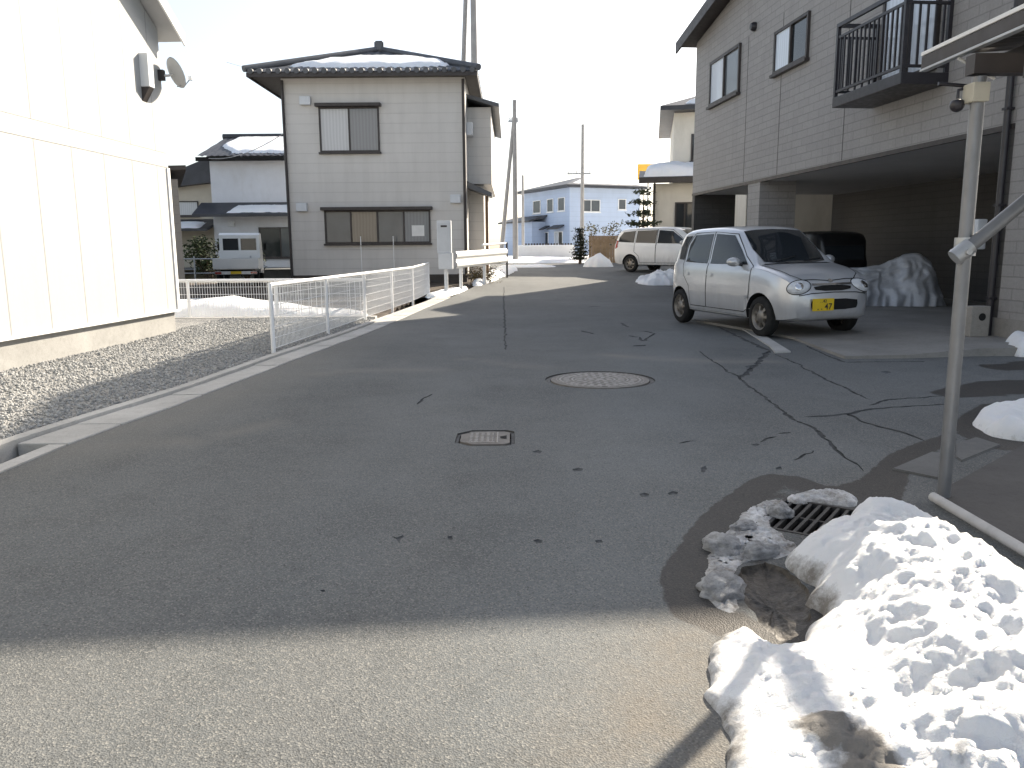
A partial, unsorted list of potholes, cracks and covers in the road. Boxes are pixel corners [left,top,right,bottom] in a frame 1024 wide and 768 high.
manhole cover [545,371,655,389]
drain grate [756,497,855,536]
crack [621,323,656,346]
manhole cover [455,430,515,446]
crack [700,326,944,471]
